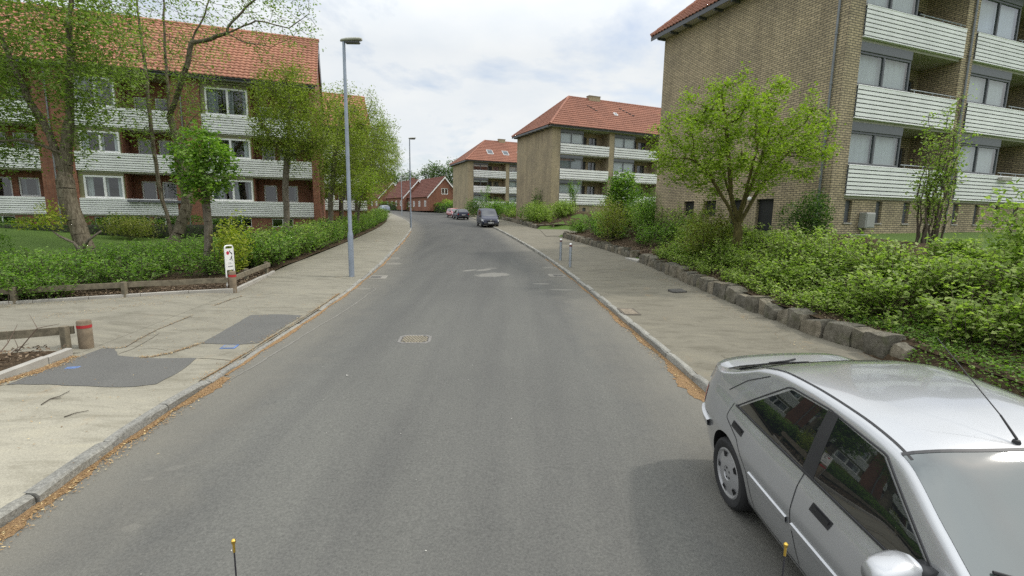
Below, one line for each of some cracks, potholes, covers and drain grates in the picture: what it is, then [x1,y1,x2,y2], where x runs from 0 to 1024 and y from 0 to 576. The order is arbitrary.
manhole cover [397,335,432,344]
crack [103,314,205,358]
